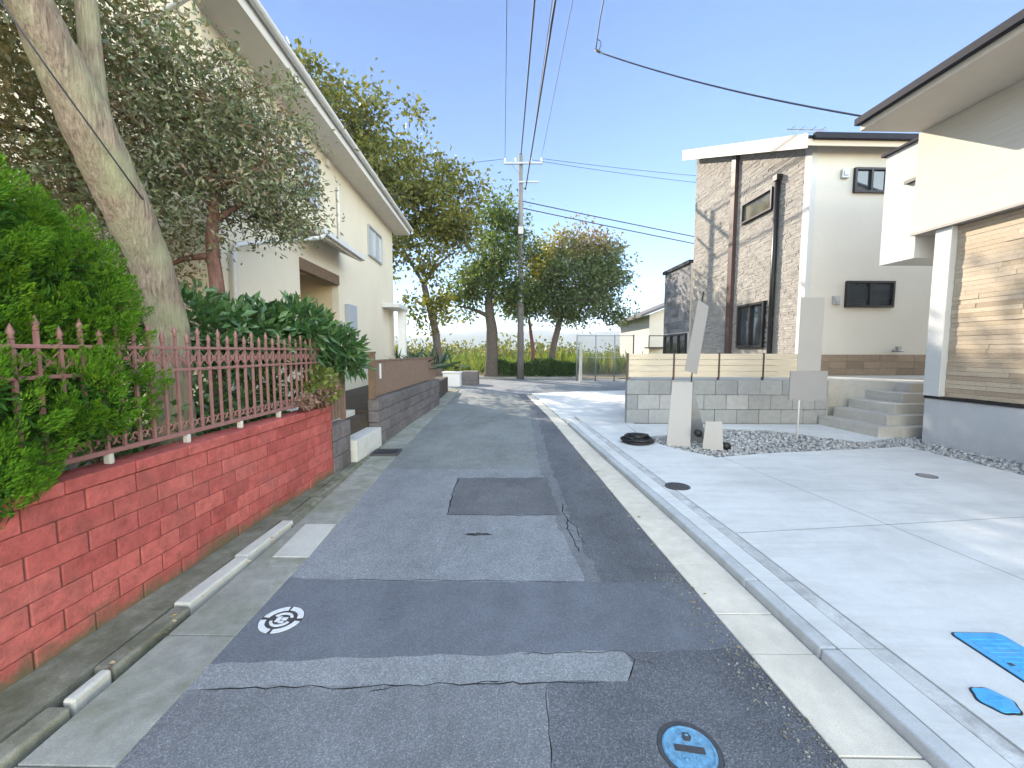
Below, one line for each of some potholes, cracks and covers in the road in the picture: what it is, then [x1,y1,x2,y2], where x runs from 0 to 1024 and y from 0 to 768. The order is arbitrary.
utility cover [969,687,1023,716]
crack [447,479,586,551]
manhole cover [657,721,724,768]
crack [200,681,599,692]
manhole cover [665,482,691,490]
drain grate [370,448,402,457]
